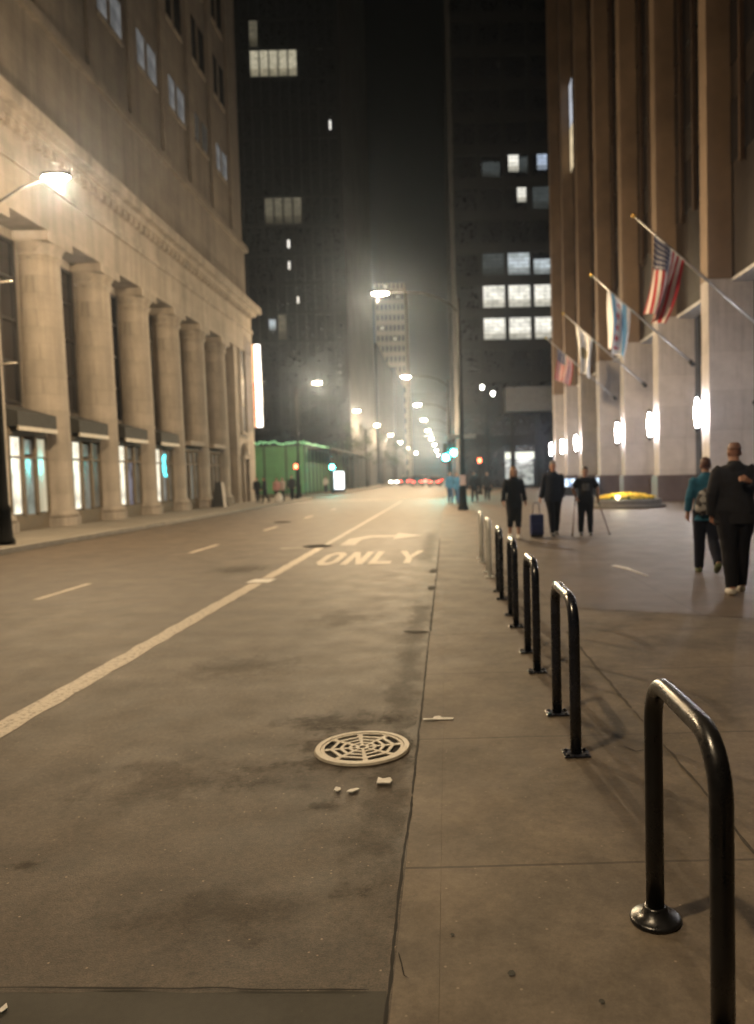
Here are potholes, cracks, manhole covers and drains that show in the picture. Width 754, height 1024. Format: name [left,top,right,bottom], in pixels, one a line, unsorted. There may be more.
drain grate [314,731,410,766]
